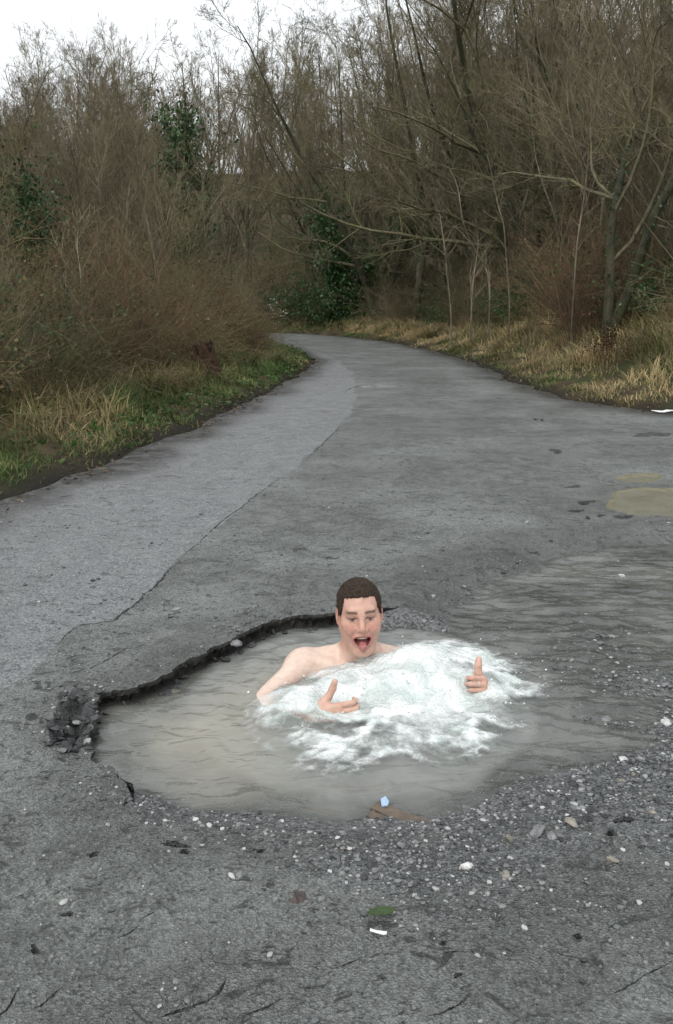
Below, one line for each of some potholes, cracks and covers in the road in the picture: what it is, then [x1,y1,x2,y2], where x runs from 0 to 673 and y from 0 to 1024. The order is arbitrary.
crack [428,995,472,1016]
crack [57,475,284,644]
crack [248,998,285,1015]
